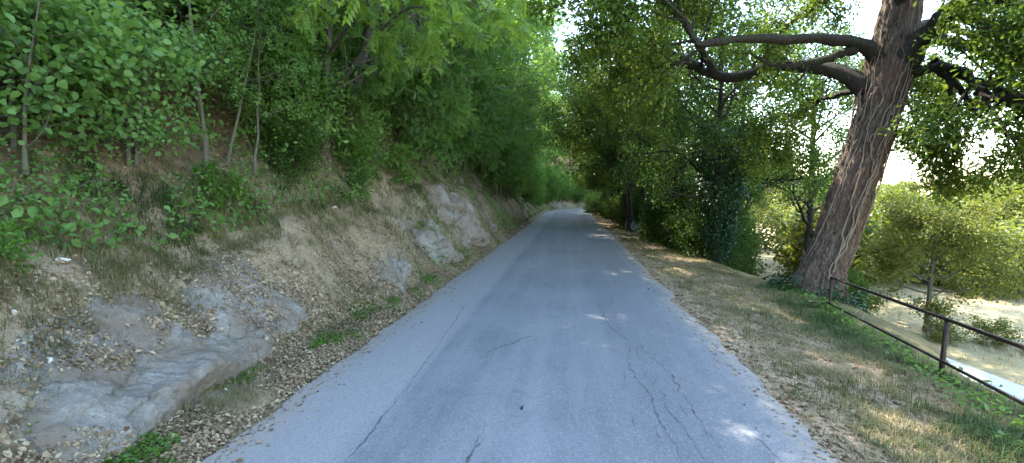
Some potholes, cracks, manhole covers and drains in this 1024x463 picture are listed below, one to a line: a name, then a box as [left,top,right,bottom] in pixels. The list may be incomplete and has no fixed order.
crack [466,425,485,463]
crack [599,280,721,463]
